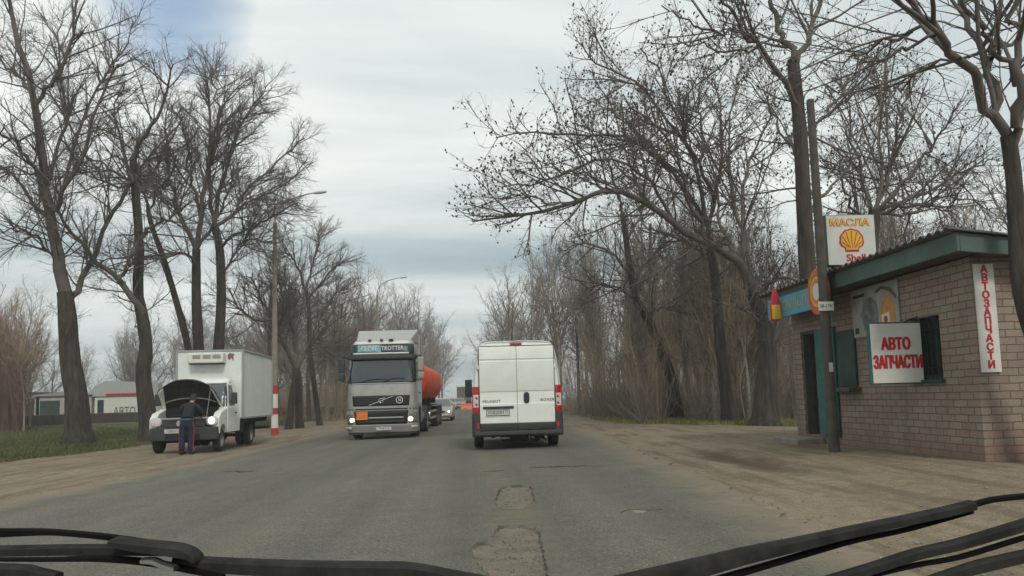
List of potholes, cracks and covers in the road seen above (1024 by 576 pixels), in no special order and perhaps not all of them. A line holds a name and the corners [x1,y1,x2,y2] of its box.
pothole [470,525,549,576]
pothole [494,485,535,510]
